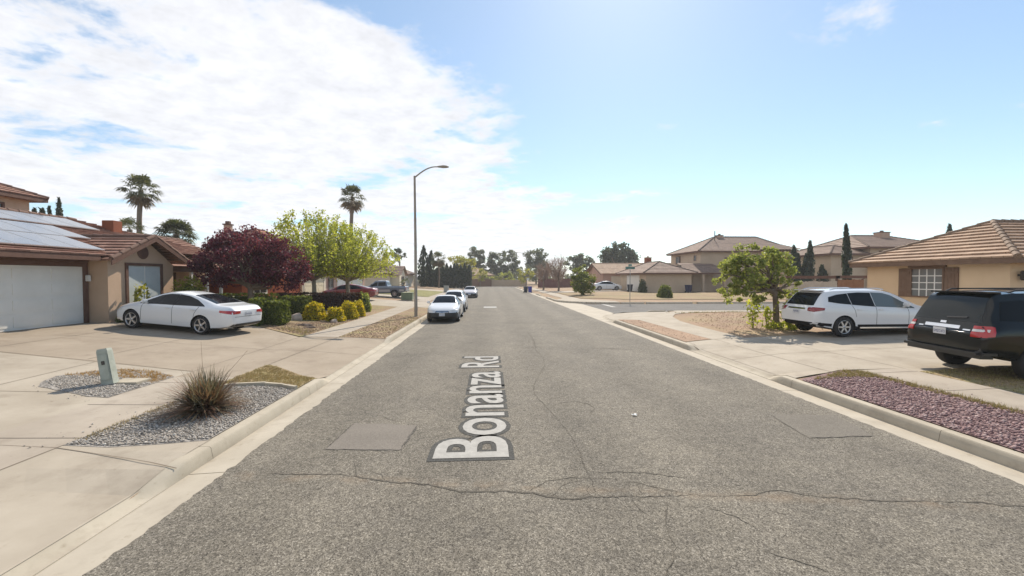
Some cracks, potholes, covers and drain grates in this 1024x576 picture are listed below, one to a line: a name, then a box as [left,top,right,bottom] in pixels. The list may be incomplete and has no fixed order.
crack [264,332,1022,576]
